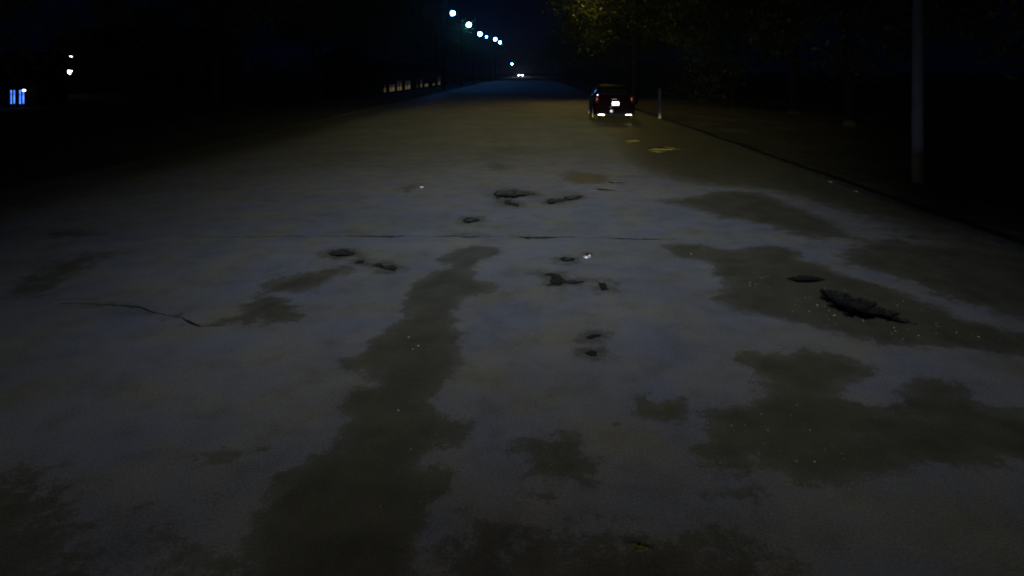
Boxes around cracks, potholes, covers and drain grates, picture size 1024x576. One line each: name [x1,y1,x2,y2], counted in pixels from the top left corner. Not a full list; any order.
pothole [543,273,584,286]
pothole [545,195,583,204]
pothole [327,249,356,257]
pothole [786,275,827,283]
crack [66,303,226,327]
pothole [817,288,917,325]
pothole [493,190,537,199]
